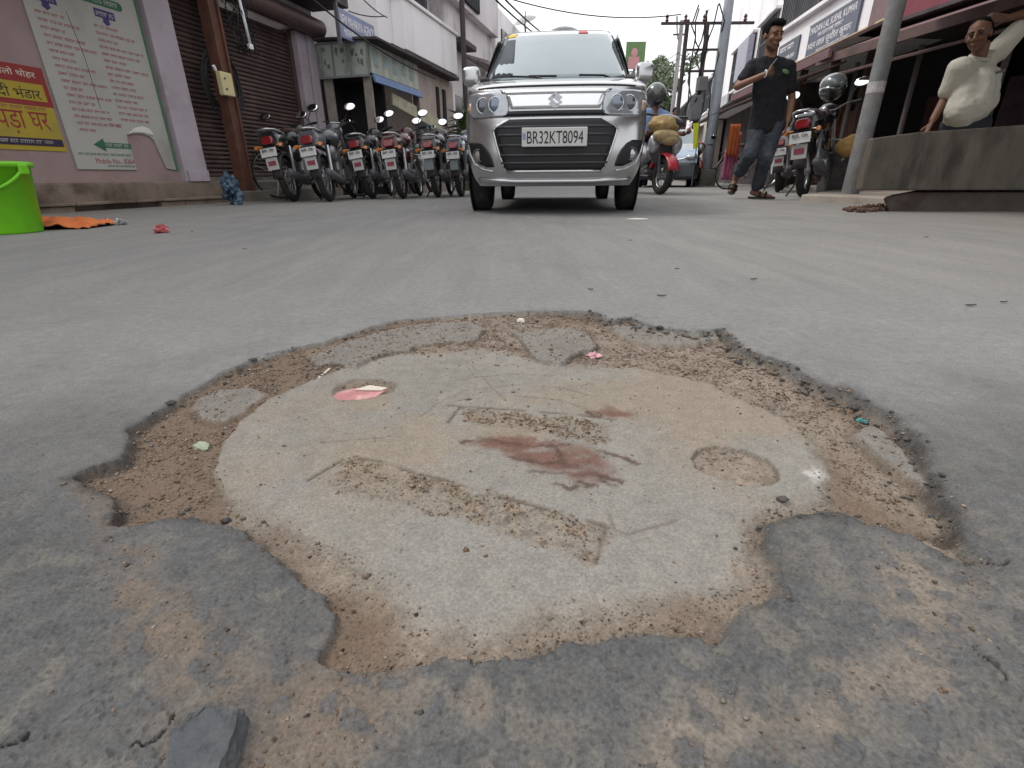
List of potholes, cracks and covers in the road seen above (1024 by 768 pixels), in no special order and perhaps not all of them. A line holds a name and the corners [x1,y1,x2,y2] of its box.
crack [132,712,175,747]
crack [0,730,31,750]
